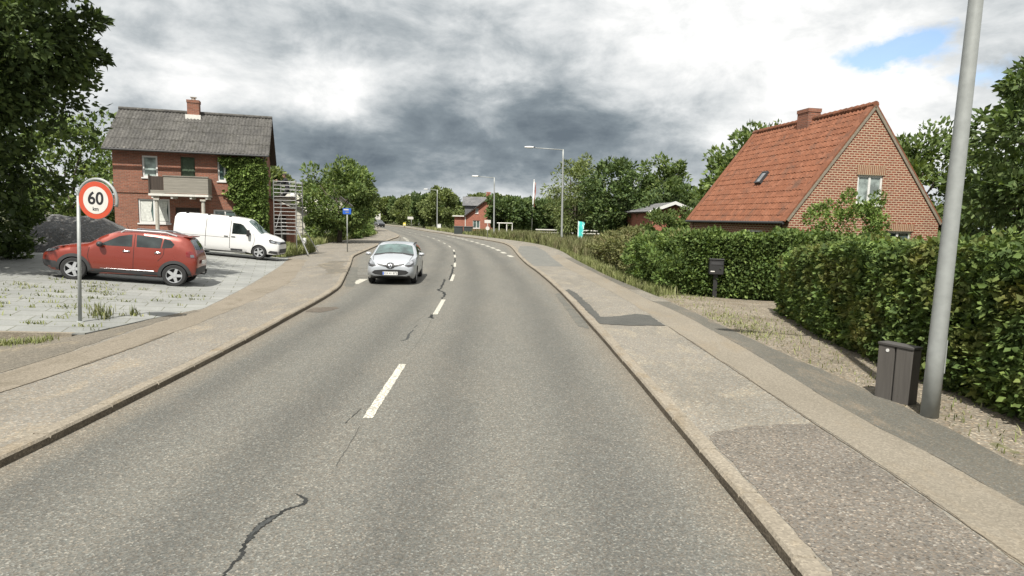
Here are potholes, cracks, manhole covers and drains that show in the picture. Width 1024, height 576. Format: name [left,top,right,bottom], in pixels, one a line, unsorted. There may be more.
crack [402,252,456,356]
crack [222,493,308,576]
